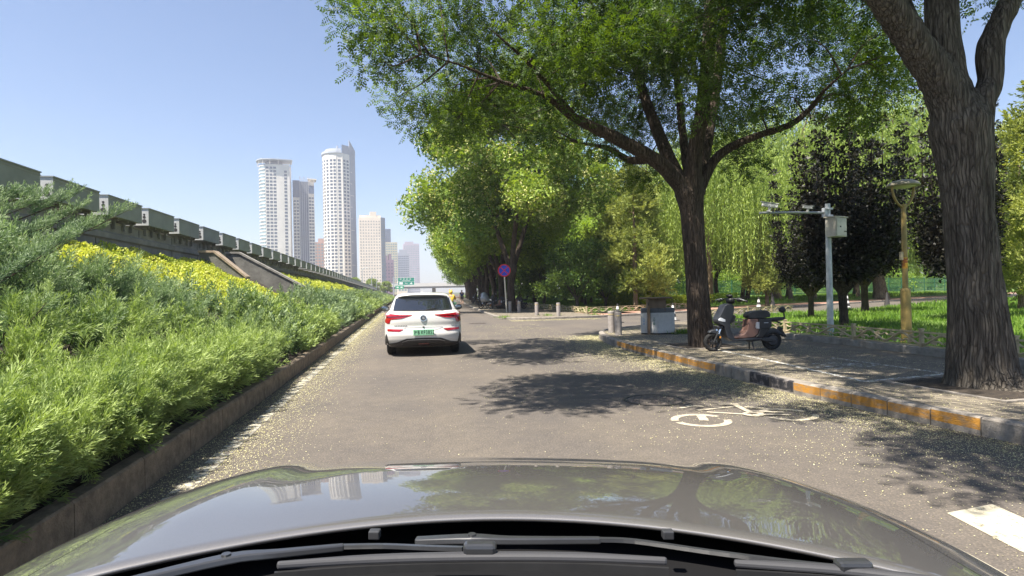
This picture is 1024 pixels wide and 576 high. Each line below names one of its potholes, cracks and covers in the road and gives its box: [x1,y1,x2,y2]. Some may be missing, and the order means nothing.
manhole cover [624,394,686,406]
